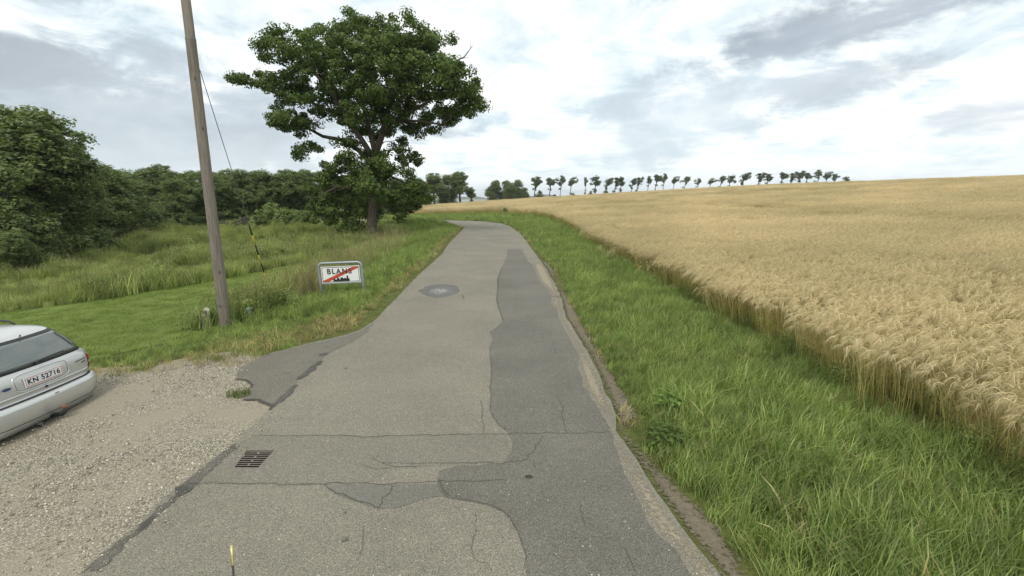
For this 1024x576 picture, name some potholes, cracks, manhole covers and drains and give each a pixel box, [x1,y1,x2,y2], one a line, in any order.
crack [440,481,527,573]
crack [236,339,608,469]
drain grate [231,449,280,469]
